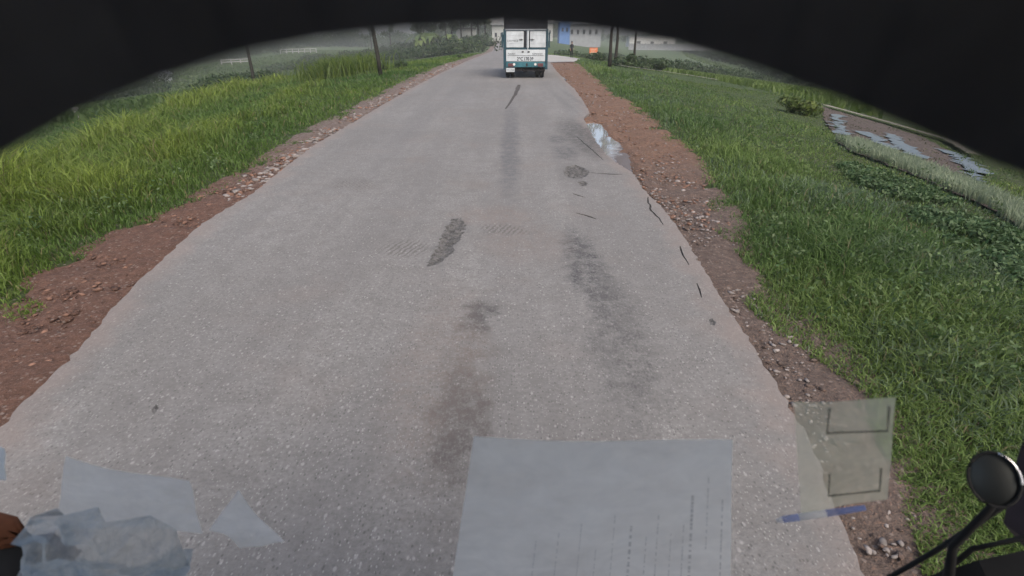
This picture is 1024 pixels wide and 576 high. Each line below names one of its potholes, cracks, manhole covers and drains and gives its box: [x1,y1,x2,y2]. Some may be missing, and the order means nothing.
pothole [425,217,466,267]
pothole [563,165,589,179]
